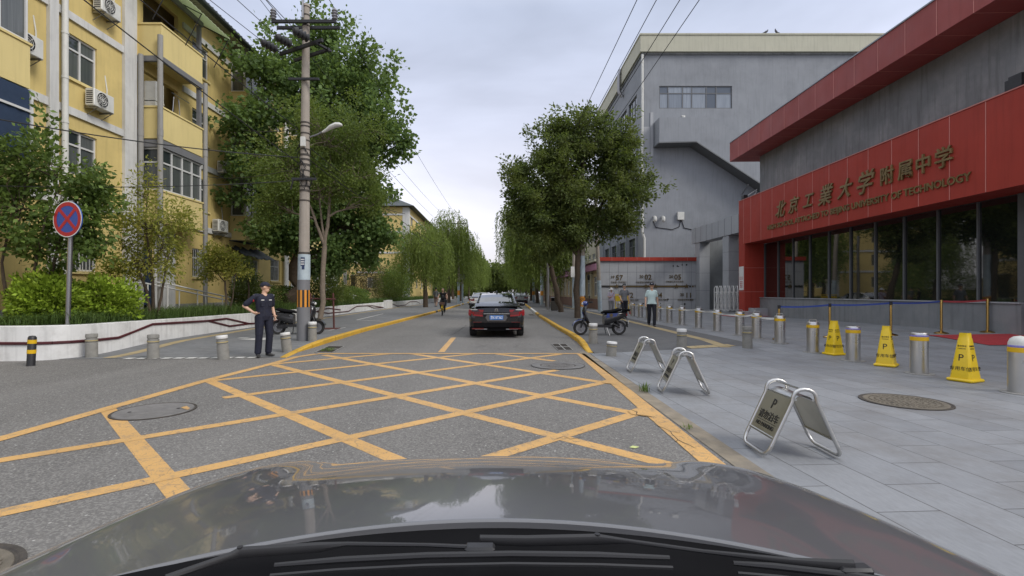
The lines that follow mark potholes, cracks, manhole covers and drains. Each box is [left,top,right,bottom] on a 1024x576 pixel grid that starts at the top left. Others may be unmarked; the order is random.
drain grate [552,343,573,351]
manhole cover [108,402,197,421]
manhole cover [858,393,956,411]
